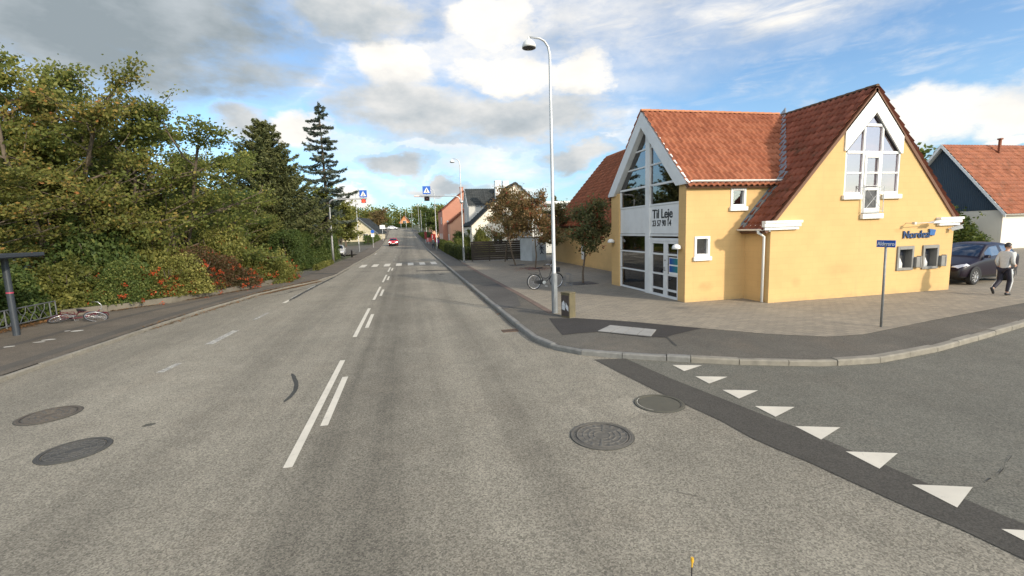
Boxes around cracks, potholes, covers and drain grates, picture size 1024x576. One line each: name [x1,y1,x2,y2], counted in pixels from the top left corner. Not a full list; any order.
manhole cover [32,437,114,466]
manhole cover [12,405,84,426]
manhole cover [634,394,686,413]
manhole cover [570,422,635,451]
